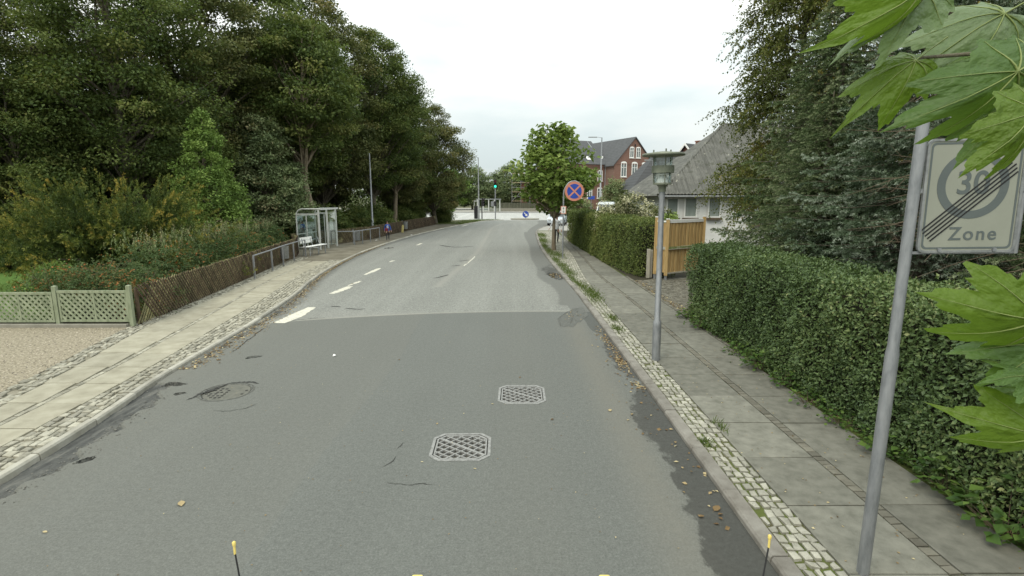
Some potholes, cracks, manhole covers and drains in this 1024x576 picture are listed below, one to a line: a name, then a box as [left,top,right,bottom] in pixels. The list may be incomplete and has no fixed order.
crack [187,381,259,411]
manhole cover [197,383,255,401]
